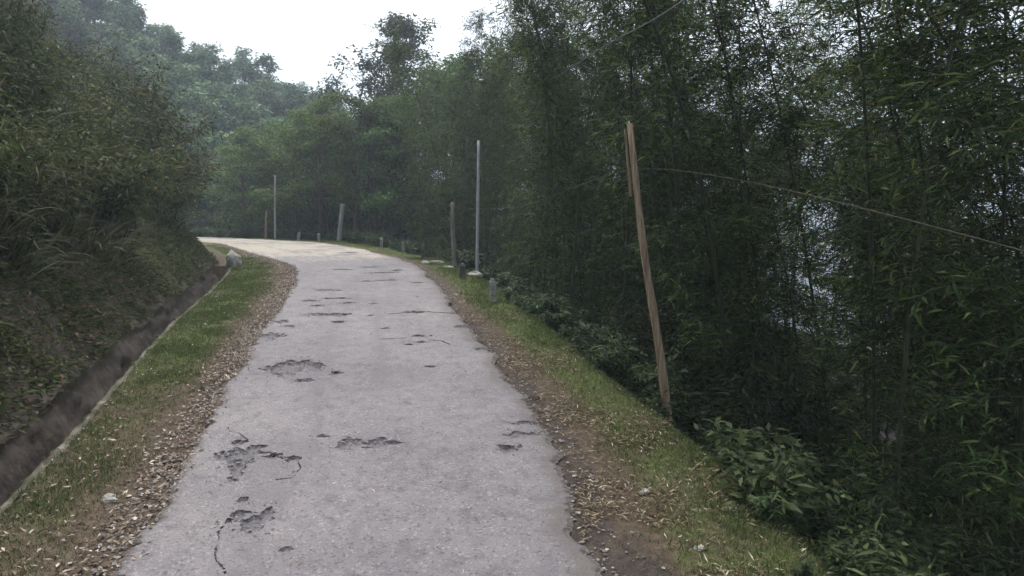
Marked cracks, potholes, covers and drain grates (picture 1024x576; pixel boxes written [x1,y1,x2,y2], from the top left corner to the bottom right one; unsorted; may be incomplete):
pothole [316,434,405,450]
crack [214,518,242,574]
pothole [498,443,523,453]
pothole [258,359,344,382]
pothole [227,497,275,534]
pothole [258,332,286,340]
pothole [213,439,302,483]
